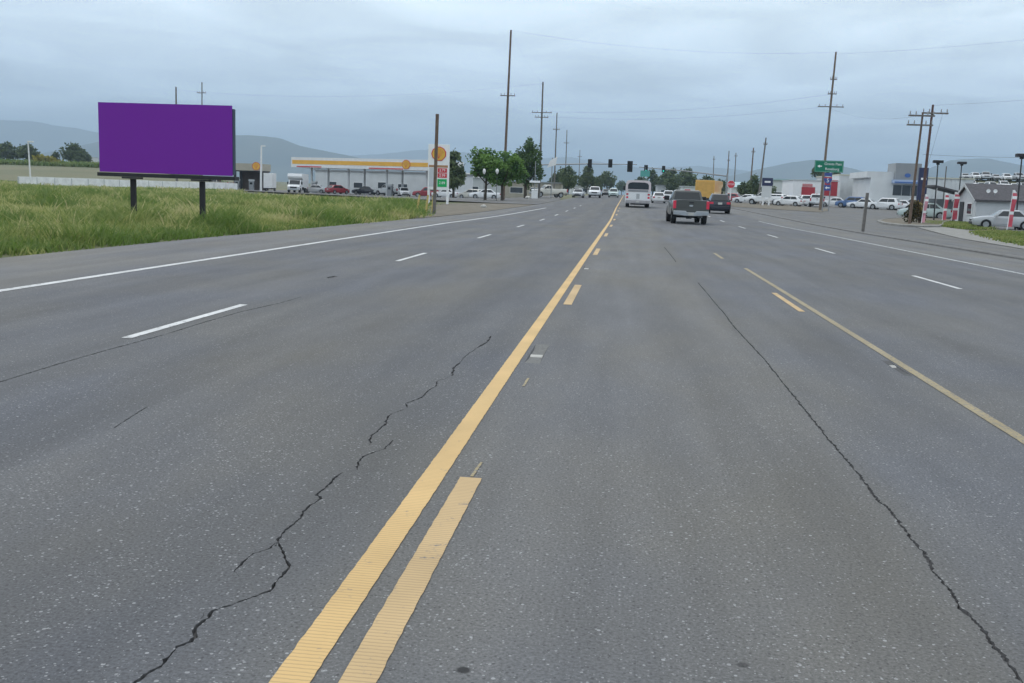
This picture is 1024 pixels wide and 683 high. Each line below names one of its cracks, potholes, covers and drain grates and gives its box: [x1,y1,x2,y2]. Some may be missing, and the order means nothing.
crack [699,284,1023,683]
crack [133,336,491,683]
